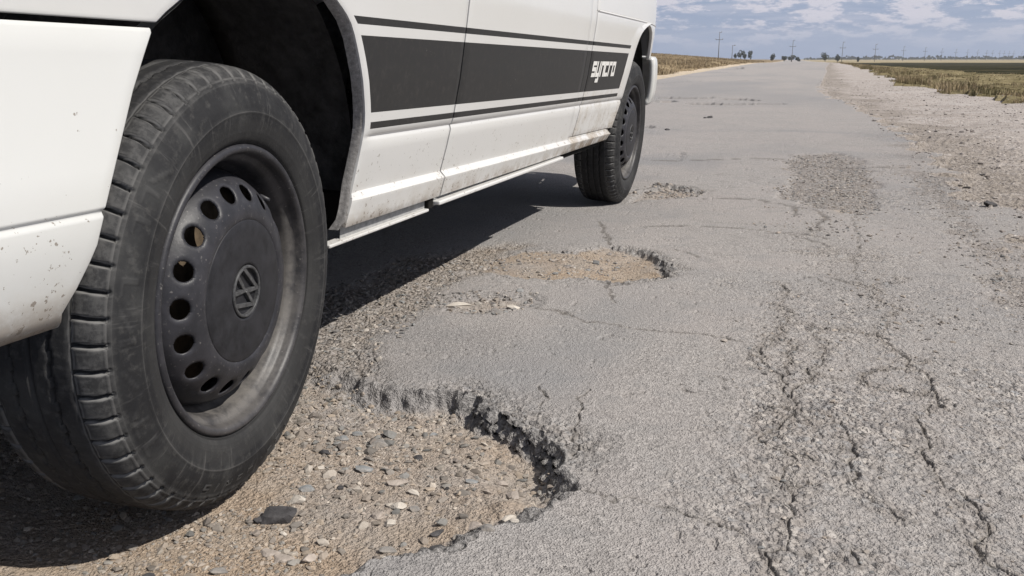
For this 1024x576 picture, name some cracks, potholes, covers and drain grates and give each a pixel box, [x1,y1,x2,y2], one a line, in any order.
crack [526,212,1024,576]
pothole [0,358,581,576]
pothole [469,245,680,285]
pothole [624,183,708,204]
